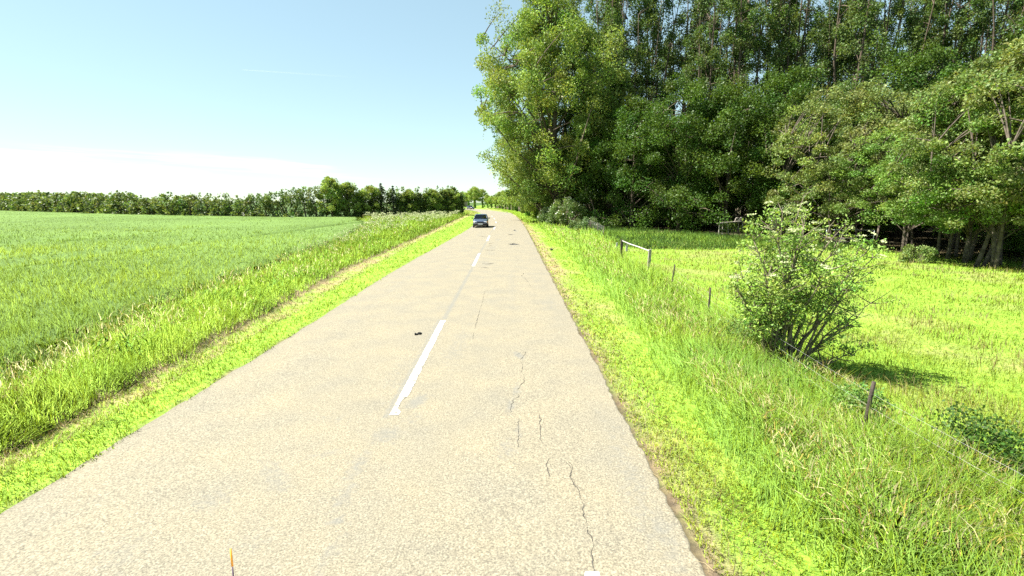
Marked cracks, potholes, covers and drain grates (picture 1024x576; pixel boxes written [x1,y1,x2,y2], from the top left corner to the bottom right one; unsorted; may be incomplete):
crack [546,459,595,571]
